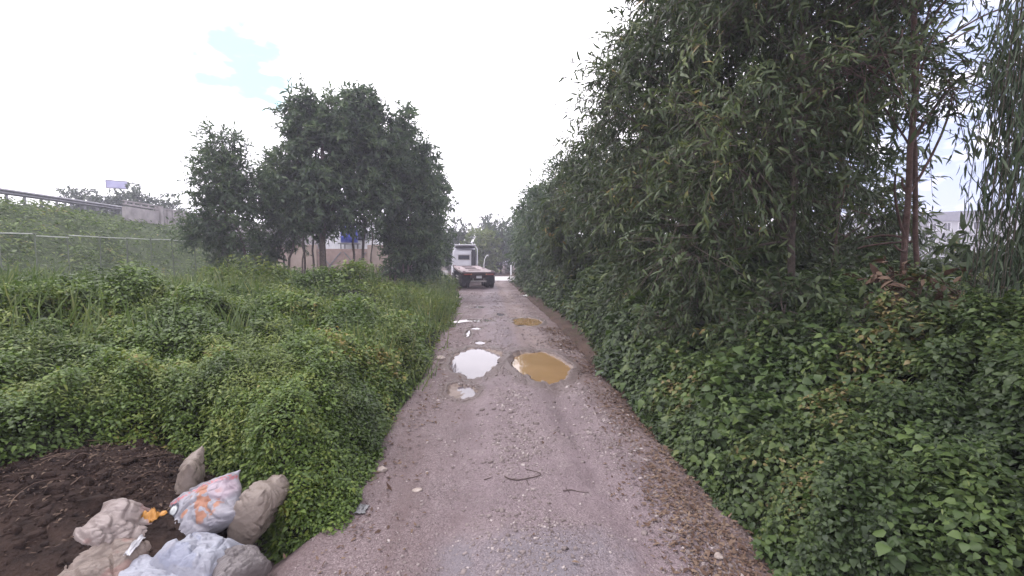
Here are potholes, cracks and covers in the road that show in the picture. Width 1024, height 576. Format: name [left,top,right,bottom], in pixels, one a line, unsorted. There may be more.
pothole [441,344,513,389]
pothole [442,381,483,402]
pothole [508,316,547,327]
pothole [497,348,583,391]
